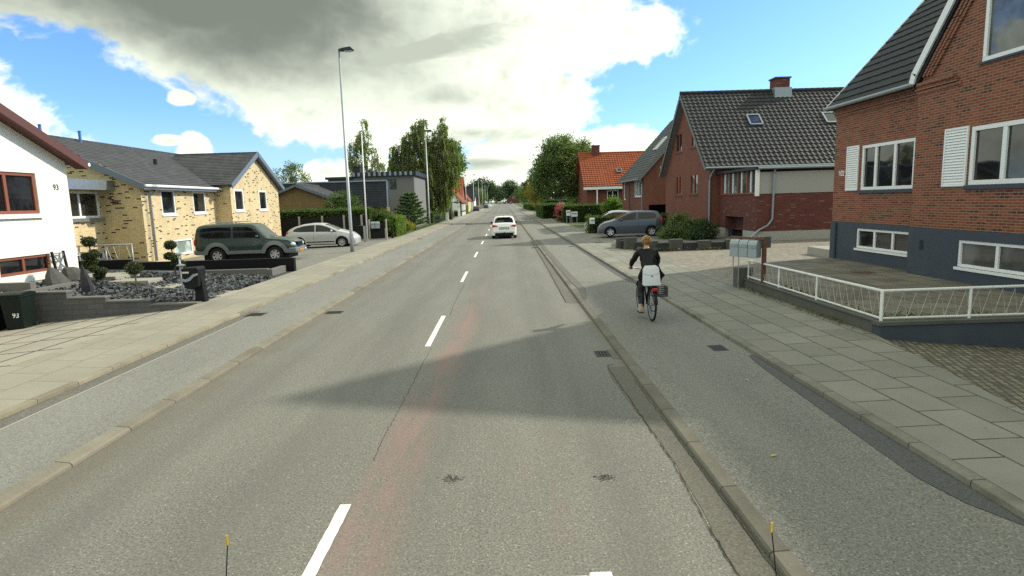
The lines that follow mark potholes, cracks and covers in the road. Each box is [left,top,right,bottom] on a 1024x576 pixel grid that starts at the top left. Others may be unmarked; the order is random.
pothole [586,469,625,486]
pothole [432,471,468,488]
